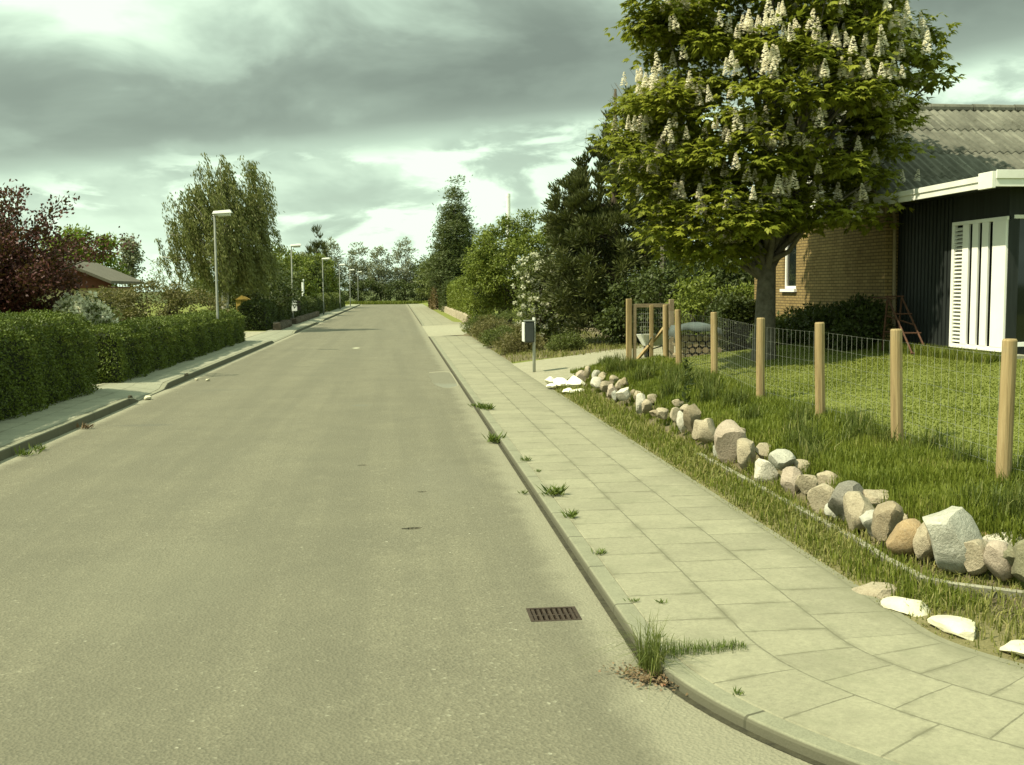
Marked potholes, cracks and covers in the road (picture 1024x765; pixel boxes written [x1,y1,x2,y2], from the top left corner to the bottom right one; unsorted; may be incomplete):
drain grate [526,606,582,622]
